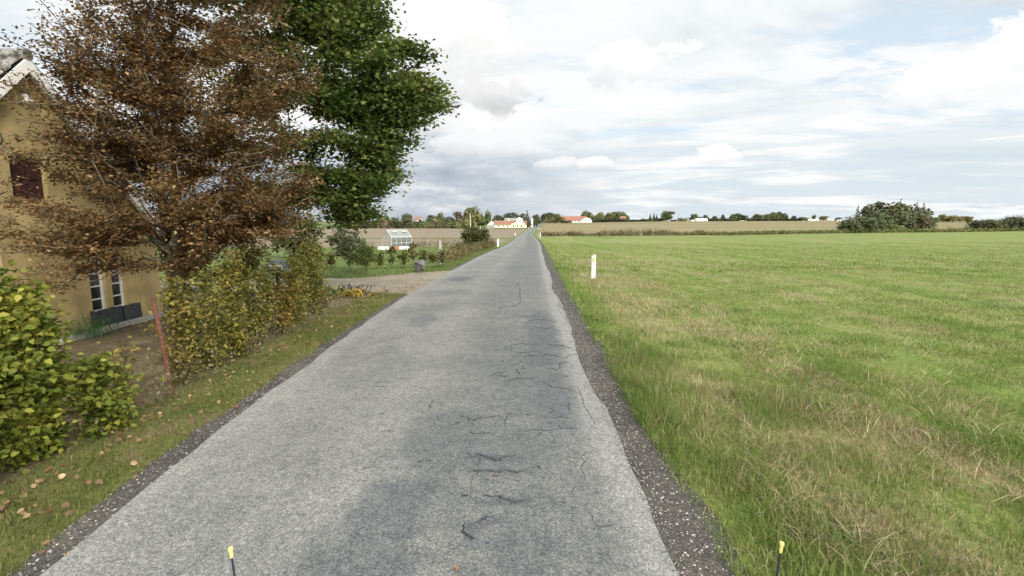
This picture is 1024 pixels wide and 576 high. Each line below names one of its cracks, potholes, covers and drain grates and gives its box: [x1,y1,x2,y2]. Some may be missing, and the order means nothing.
crack [418,283,596,439]
crack [460,452,614,540]
